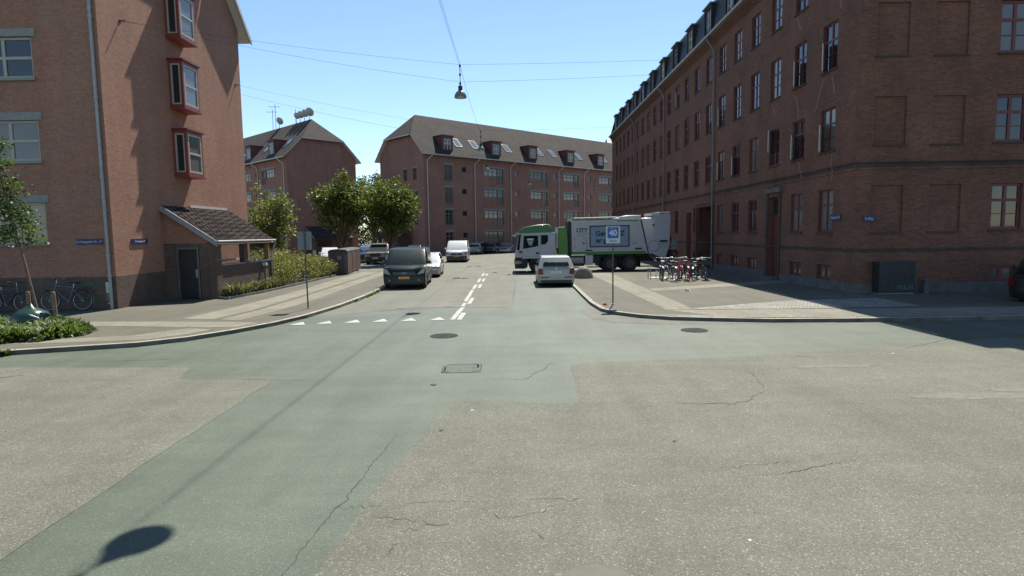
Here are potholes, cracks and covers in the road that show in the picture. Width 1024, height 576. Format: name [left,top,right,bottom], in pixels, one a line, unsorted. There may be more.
crack [705,459,856,475]
crack [281,435,563,576]
manhole cover [441,364,482,373]
